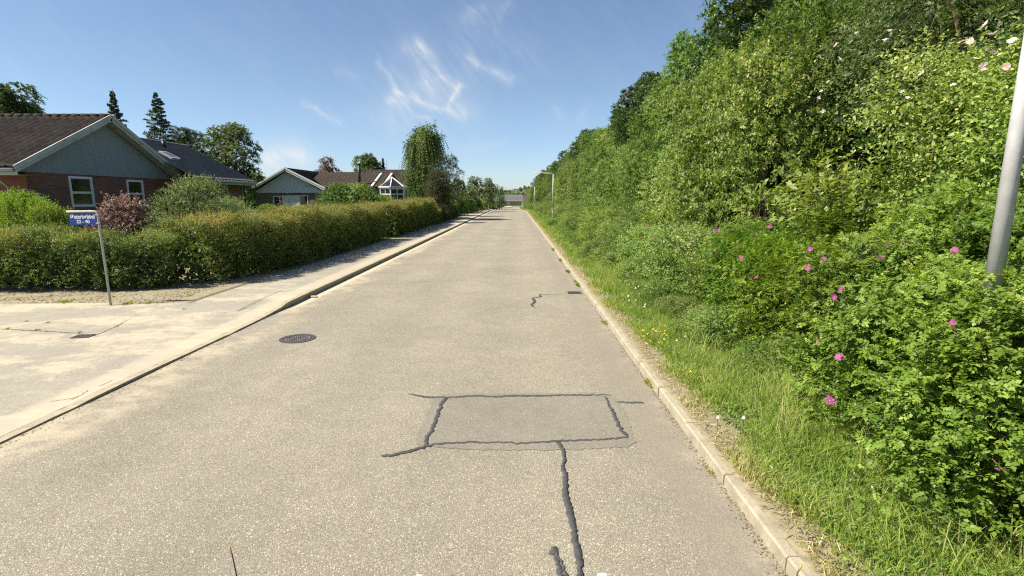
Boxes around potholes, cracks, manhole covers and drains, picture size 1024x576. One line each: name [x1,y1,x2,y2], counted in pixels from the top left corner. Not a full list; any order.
manhole cover [279,334,316,343]
